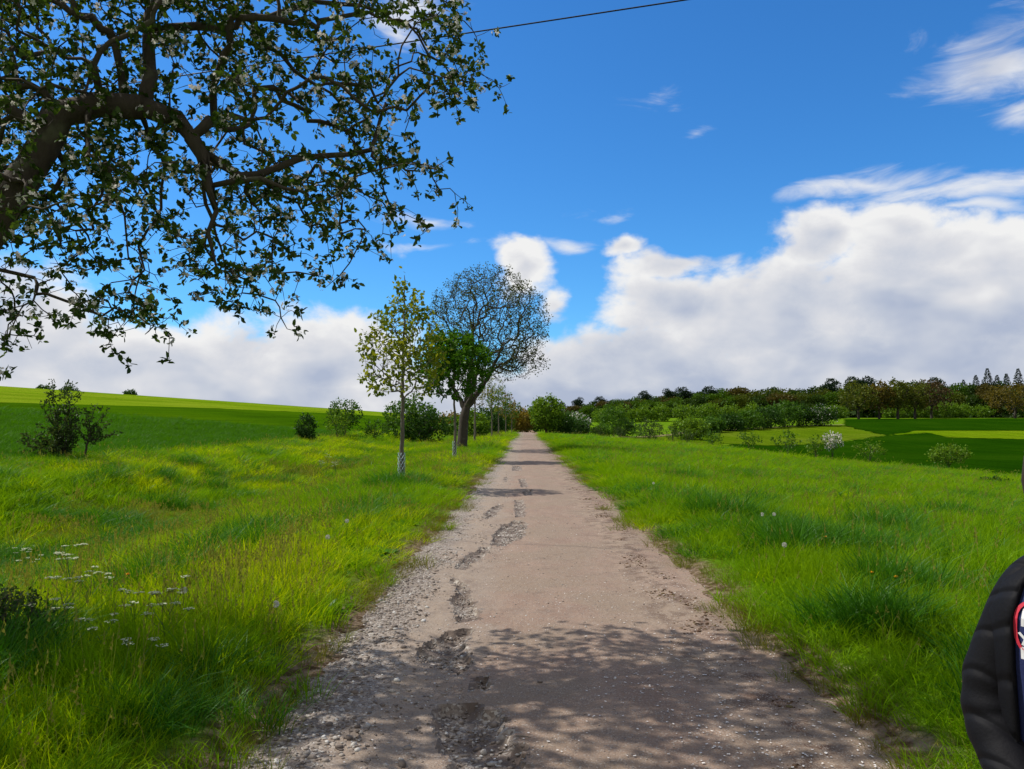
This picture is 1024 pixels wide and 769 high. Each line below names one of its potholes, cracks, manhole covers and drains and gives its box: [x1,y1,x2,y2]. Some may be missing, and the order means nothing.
pothole [482,504,503,520]
pothole [490,520,529,546]
pothole [415,627,477,676]
pothole [454,546,492,570]
pothole [446,576,483,623]
pothole [427,702,535,769]
pothole [512,500,527,518]
pothole [467,675,494,693]
